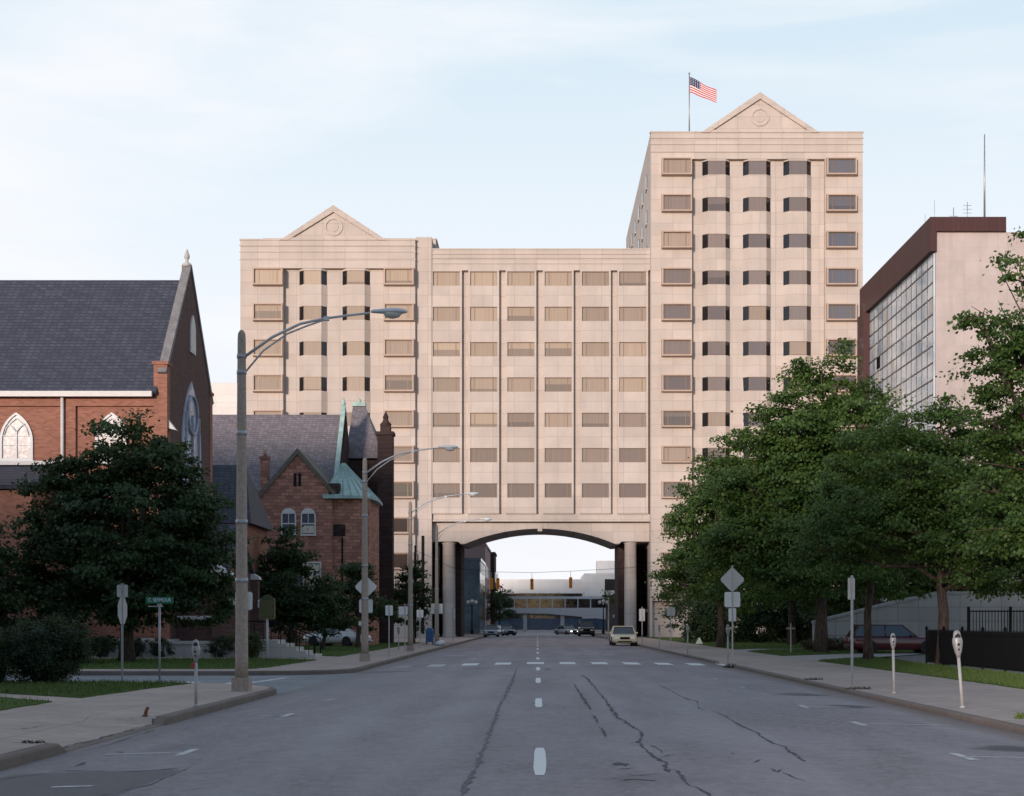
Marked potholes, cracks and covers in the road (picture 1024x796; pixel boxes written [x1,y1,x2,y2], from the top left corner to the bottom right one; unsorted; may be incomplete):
crack [581,675,711,796]
crack [659,685,881,781]
